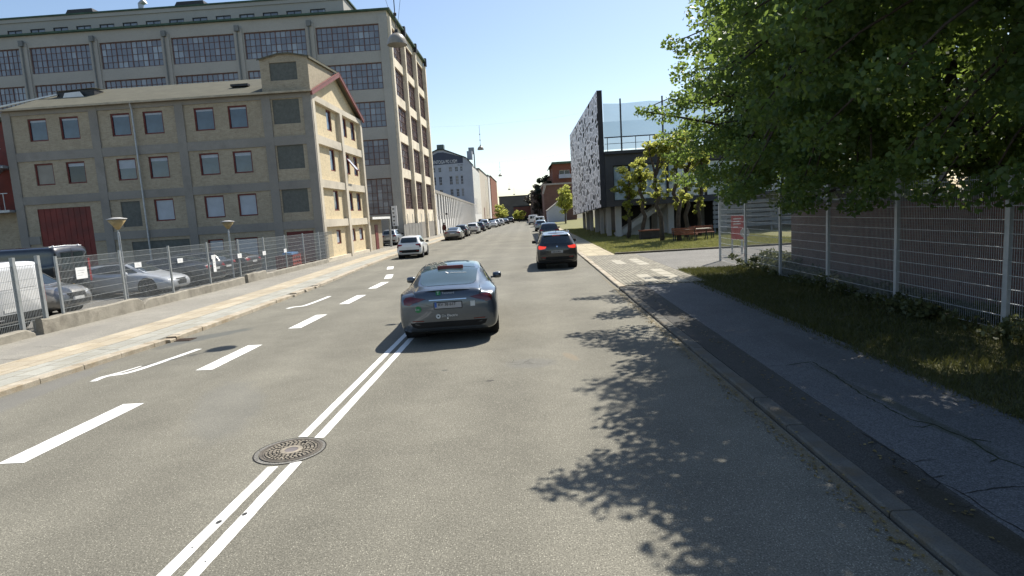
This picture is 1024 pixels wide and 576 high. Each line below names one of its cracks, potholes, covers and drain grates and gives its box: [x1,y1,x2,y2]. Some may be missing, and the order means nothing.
manhole cover [253,437,327,465]
